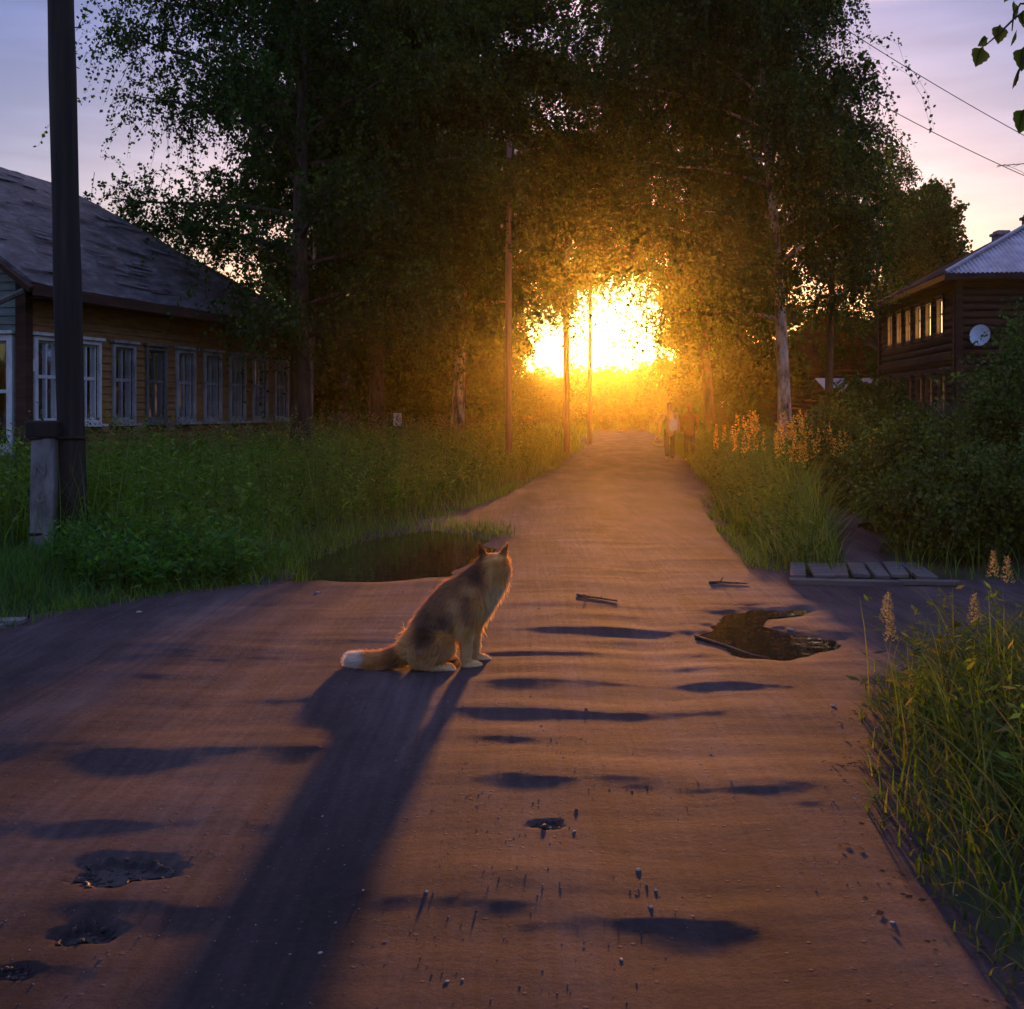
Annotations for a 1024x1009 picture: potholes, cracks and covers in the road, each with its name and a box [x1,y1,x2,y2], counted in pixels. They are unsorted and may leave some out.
pothole [530,820,562,830]
pothole [55,919,117,947]
pothole [0,963,34,981]
pothole [72,857,178,888]
